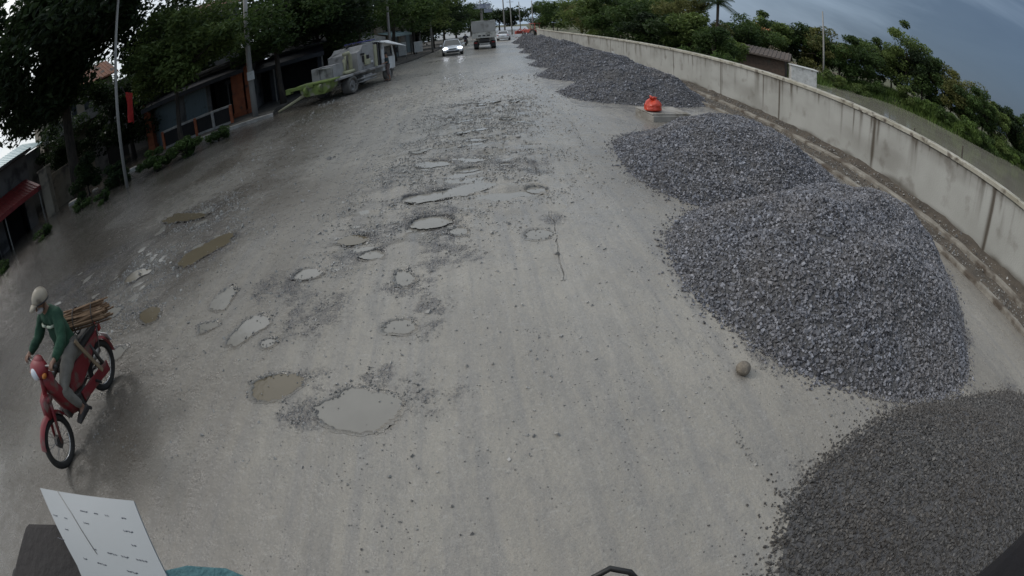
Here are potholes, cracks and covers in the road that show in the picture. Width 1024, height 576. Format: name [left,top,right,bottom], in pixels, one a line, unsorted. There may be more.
pothole [355,247,388,261]
pothole [332,231,374,248]
pothole [289,267,325,281]
pothole [207,283,241,315]
pothole [521,227,558,241]
pothole [376,316,421,336]
pothole [308,378,412,446]
pothole [407,211,458,231]
pothole [392,267,421,290]
pothole [136,302,166,325]
pothole [410,159,457,171]
pothole [246,370,314,404]
